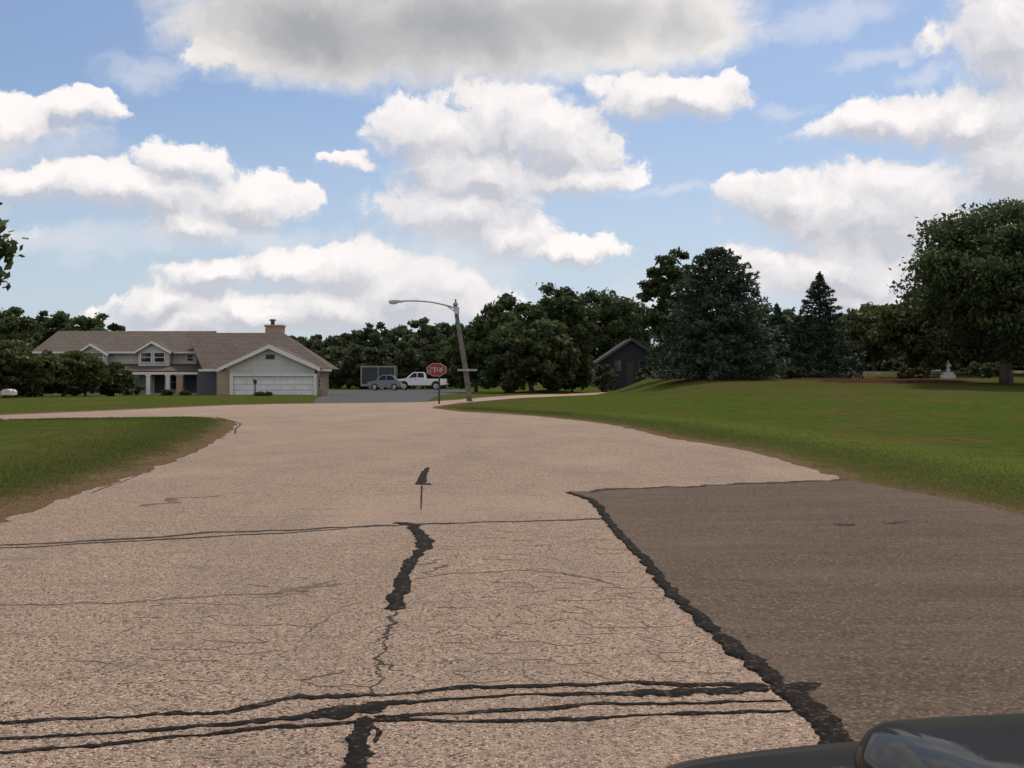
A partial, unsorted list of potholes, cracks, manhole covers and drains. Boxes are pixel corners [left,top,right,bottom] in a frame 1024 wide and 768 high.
crack [91,469,224,506]
